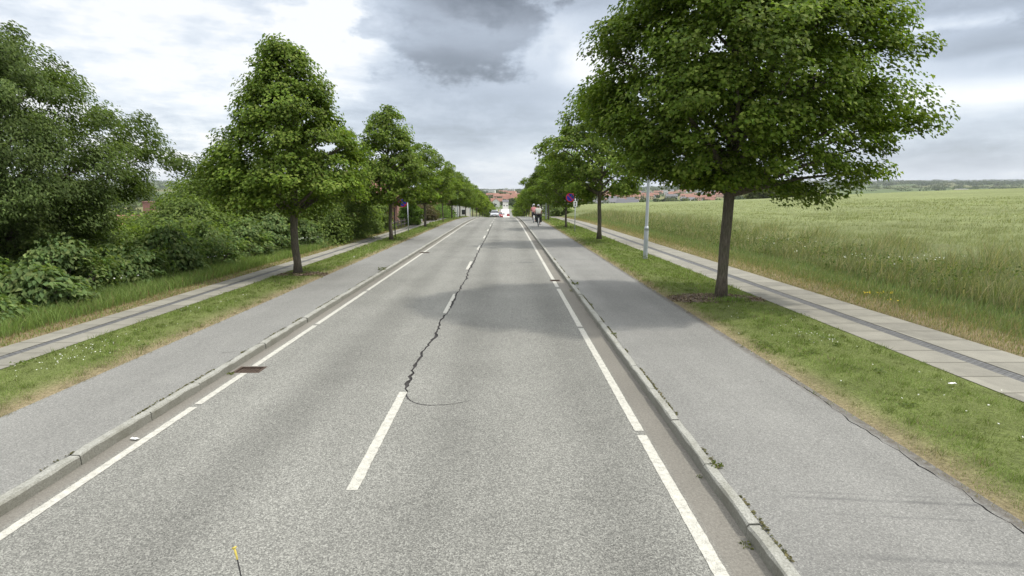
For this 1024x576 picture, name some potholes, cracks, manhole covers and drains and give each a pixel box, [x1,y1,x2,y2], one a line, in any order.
crack [404,225,492,405]
